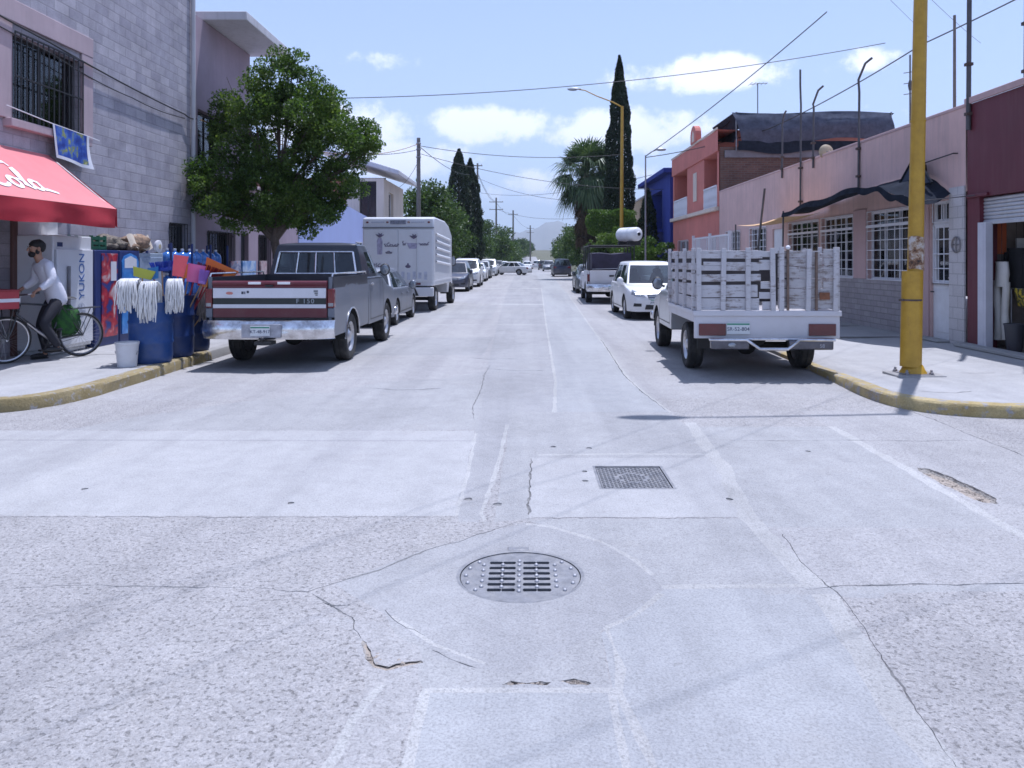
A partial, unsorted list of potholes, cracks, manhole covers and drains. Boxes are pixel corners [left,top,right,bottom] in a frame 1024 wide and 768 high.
crack [472,358,544,418]
pothole [918,468,998,504]
manhole cover [456,547,584,603]
